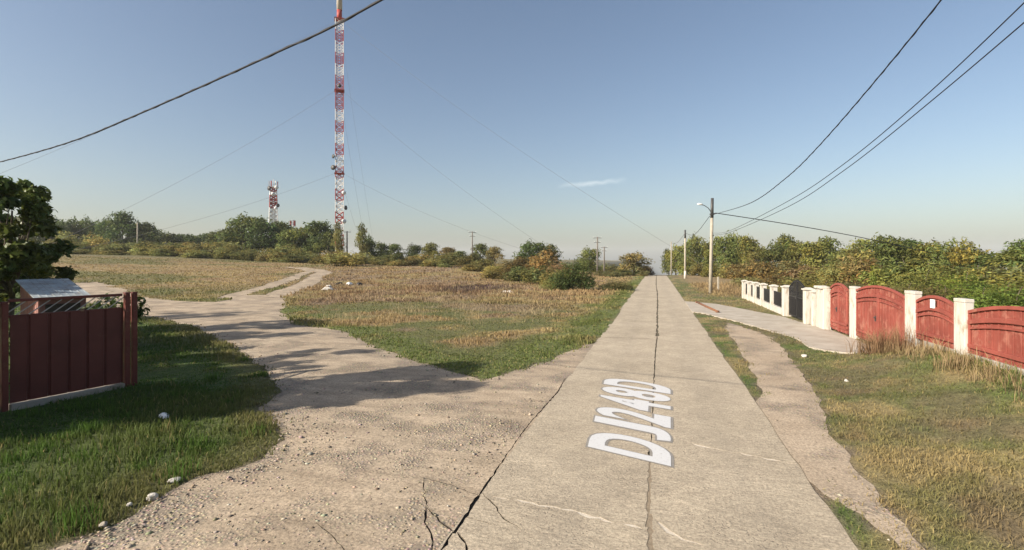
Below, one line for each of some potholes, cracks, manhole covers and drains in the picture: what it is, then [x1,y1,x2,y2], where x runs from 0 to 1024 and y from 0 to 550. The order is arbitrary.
crack [694,444,794,464]
crack [422,277,706,550]
